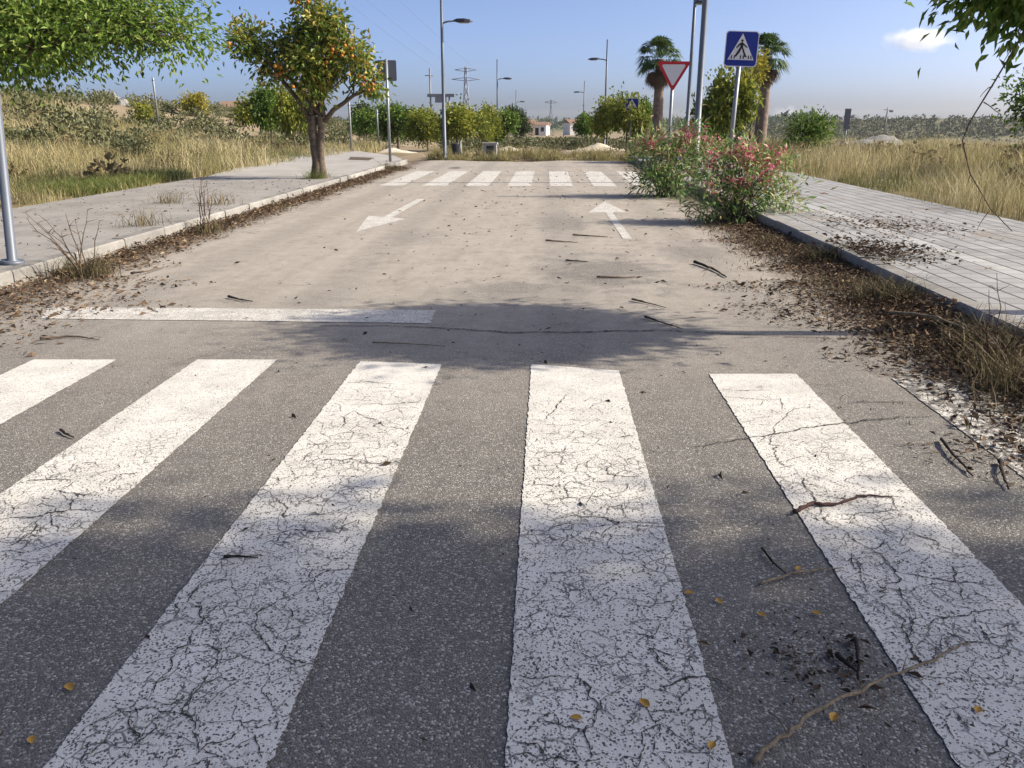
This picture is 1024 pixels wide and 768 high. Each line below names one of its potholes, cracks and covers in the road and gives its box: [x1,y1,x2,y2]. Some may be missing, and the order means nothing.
crack [512,394,733,768]
crack [725,382,1024,768]
crack [66,380,416,768]
crack [0,462,139,592]
crack [320,325,893,340]
